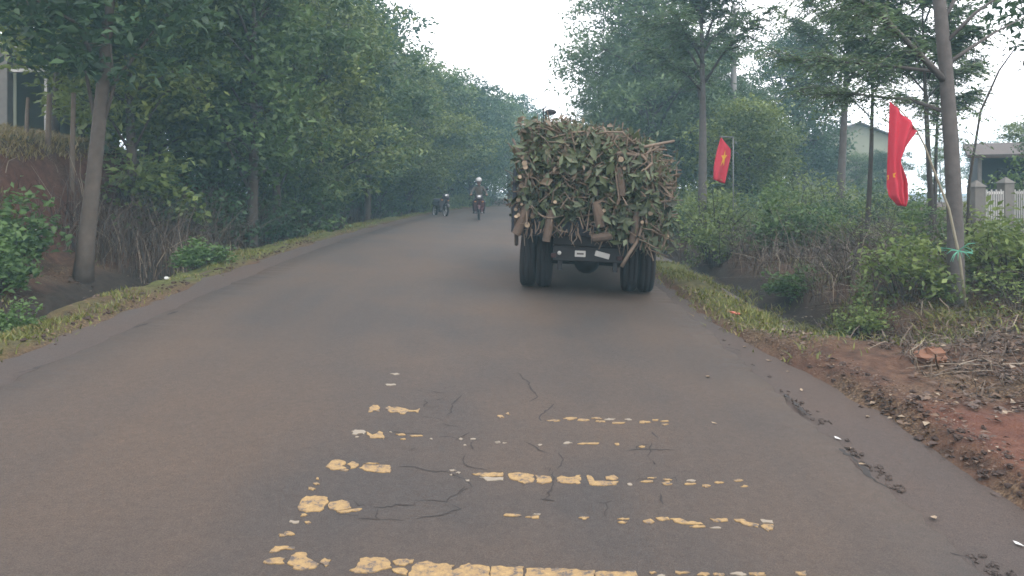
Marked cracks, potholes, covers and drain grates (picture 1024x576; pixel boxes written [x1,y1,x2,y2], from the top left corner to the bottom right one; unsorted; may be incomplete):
crack [627,432,677,503]
crack [519,373,554,421]
crack [336,391,486,520]
crack [839,448,889,488]
crack [526,442,564,501]
